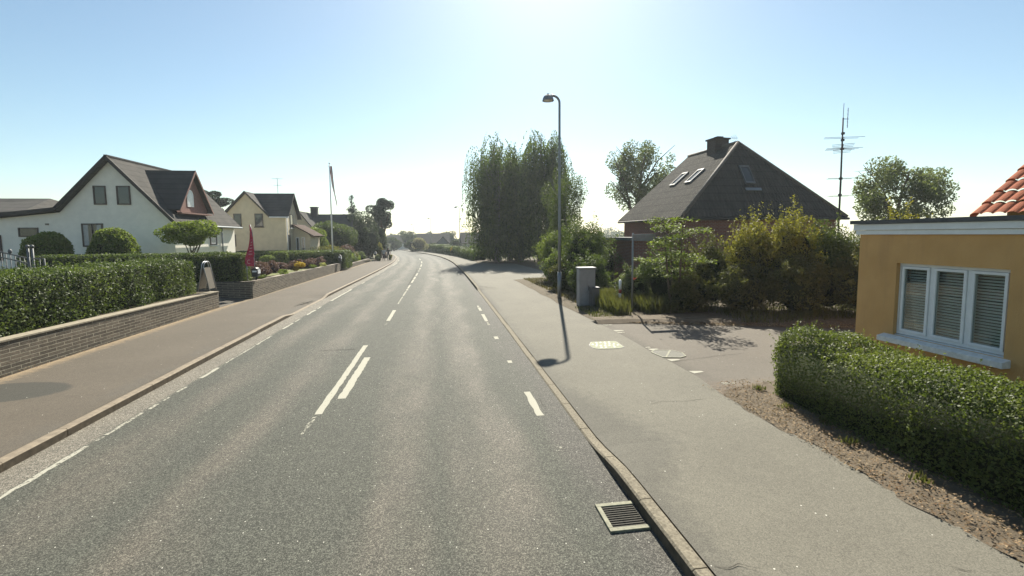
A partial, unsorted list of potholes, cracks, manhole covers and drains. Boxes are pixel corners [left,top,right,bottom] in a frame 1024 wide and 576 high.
manhole cover [651,350,686,358]
manhole cover [589,341,624,350]
